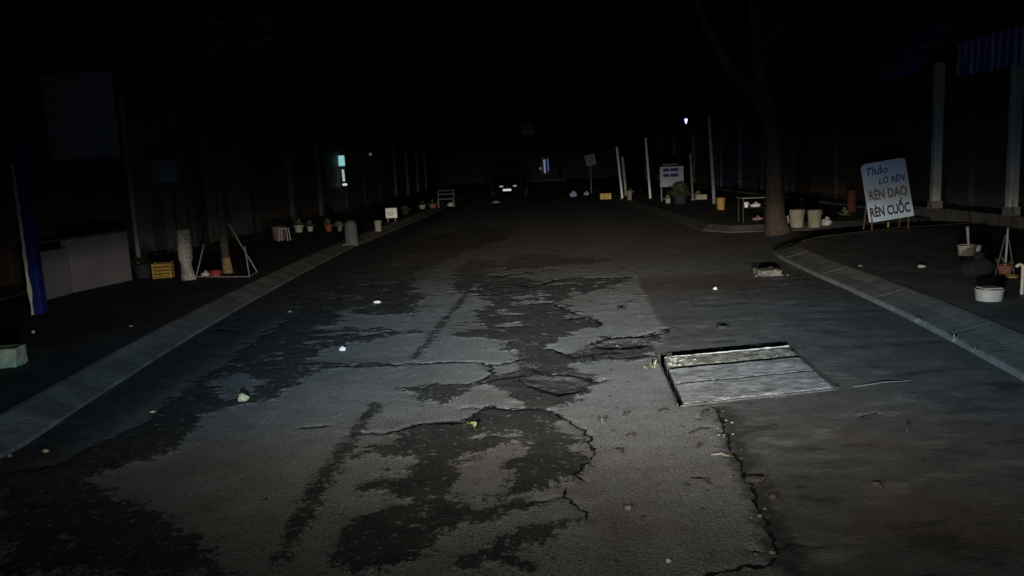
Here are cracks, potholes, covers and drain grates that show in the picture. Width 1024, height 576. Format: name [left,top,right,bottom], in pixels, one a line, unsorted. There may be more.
pothole [594,338,648,350]
crack [706,544,831,576]
manhole cover [655,341,839,407]
crack [351,405,596,518]
pothole [522,375,591,396]
